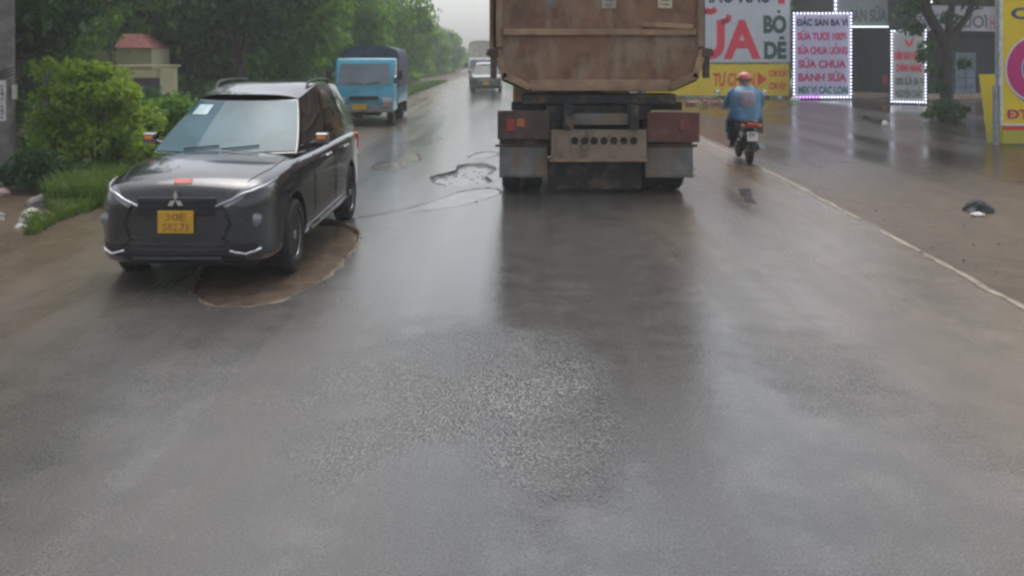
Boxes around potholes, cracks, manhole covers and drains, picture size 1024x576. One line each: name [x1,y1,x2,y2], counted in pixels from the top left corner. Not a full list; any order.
pothole [429,162,497,186]
pothole [371,153,424,171]
